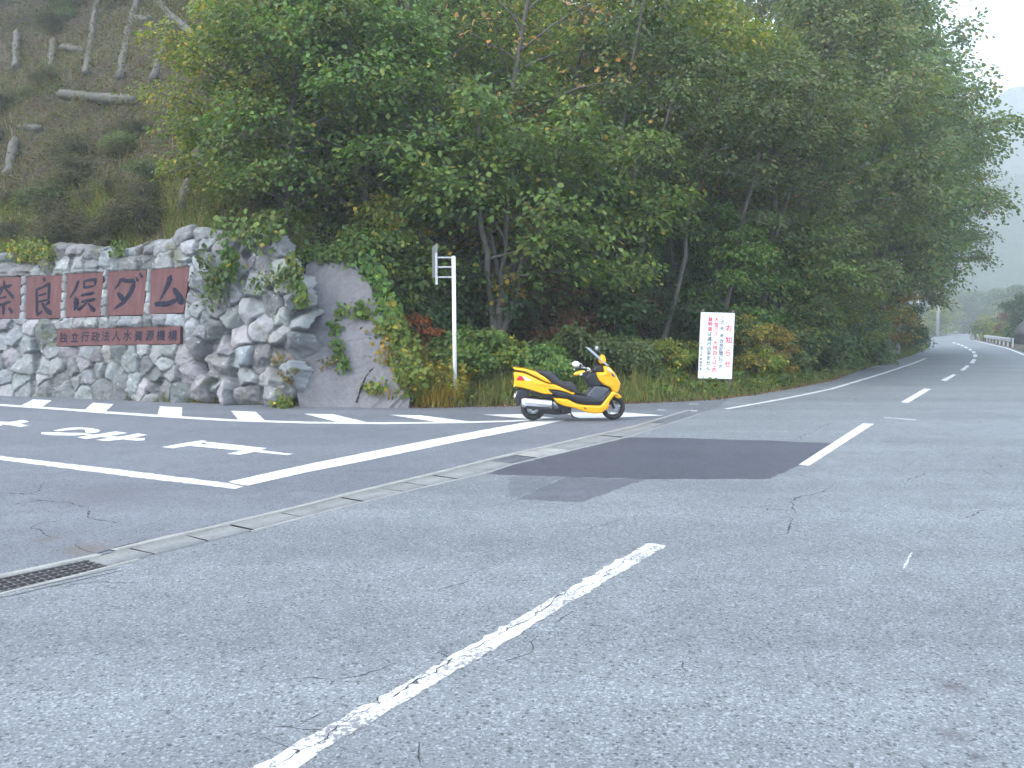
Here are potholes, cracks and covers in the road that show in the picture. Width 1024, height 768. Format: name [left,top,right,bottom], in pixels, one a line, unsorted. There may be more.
drain grate [0,560,123,598]
crack [11,486,127,537]
crack [758,488,828,535]
